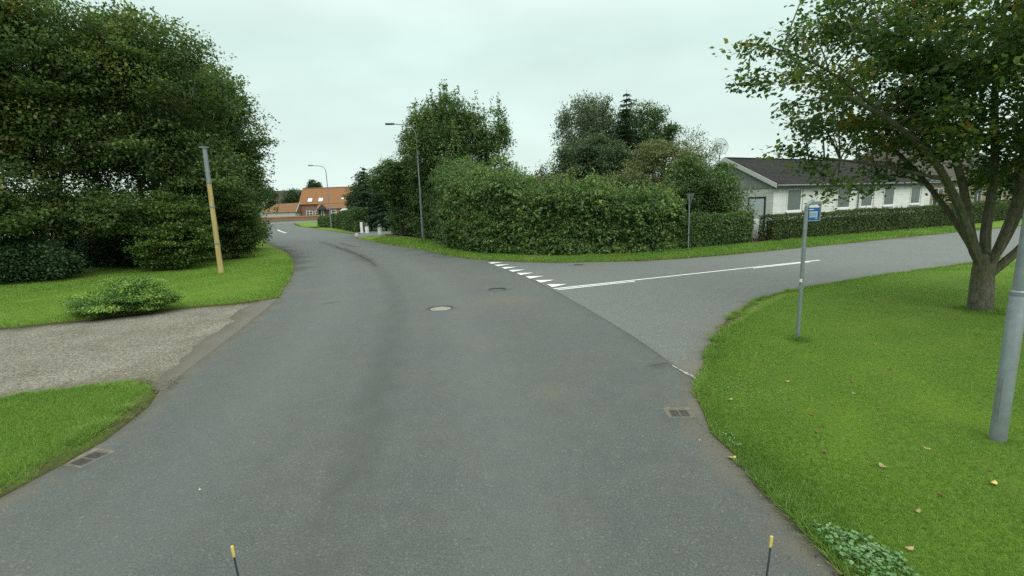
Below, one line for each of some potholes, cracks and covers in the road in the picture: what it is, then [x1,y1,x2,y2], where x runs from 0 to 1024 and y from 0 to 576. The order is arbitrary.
drain grate [64,448,116,468]
drain grate [663,407,697,418]
